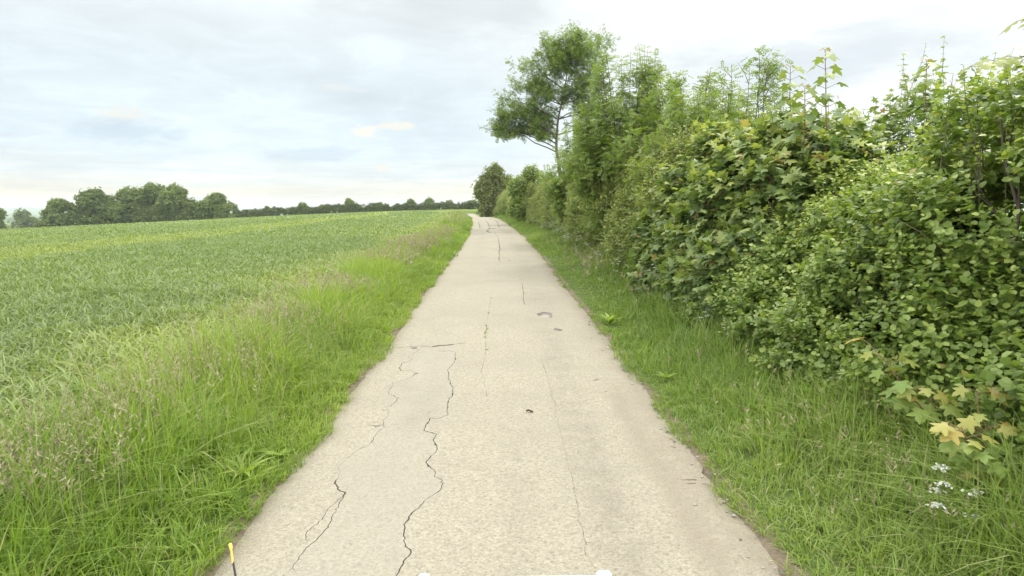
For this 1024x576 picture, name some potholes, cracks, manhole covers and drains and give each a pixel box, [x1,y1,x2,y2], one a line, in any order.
crack [287,343,462,576]
crack [541,359,587,554]
